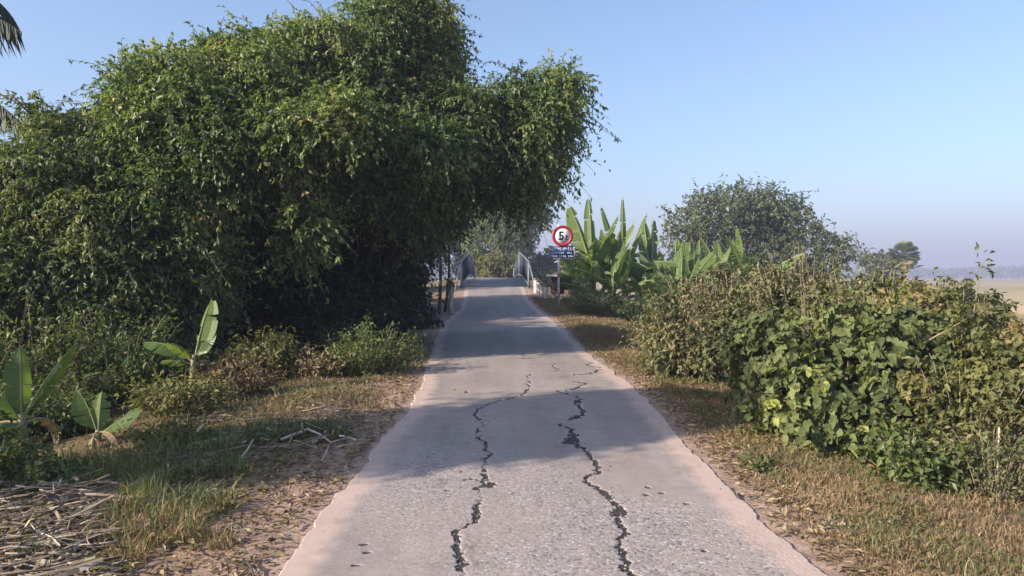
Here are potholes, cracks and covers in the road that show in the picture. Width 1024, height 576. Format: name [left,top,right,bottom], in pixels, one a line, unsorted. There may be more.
crack [552,363,635,576]
crack [452,374,532,572]
